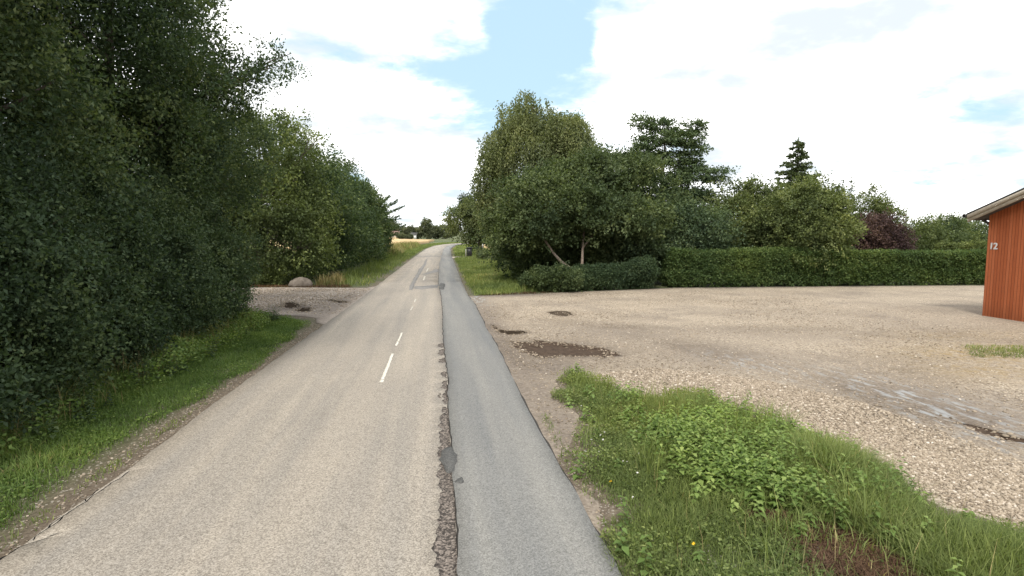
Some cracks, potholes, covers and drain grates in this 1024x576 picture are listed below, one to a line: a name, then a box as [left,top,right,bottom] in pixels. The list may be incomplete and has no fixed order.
pothole [492,325,528,335]
pothole [506,339,624,359]
